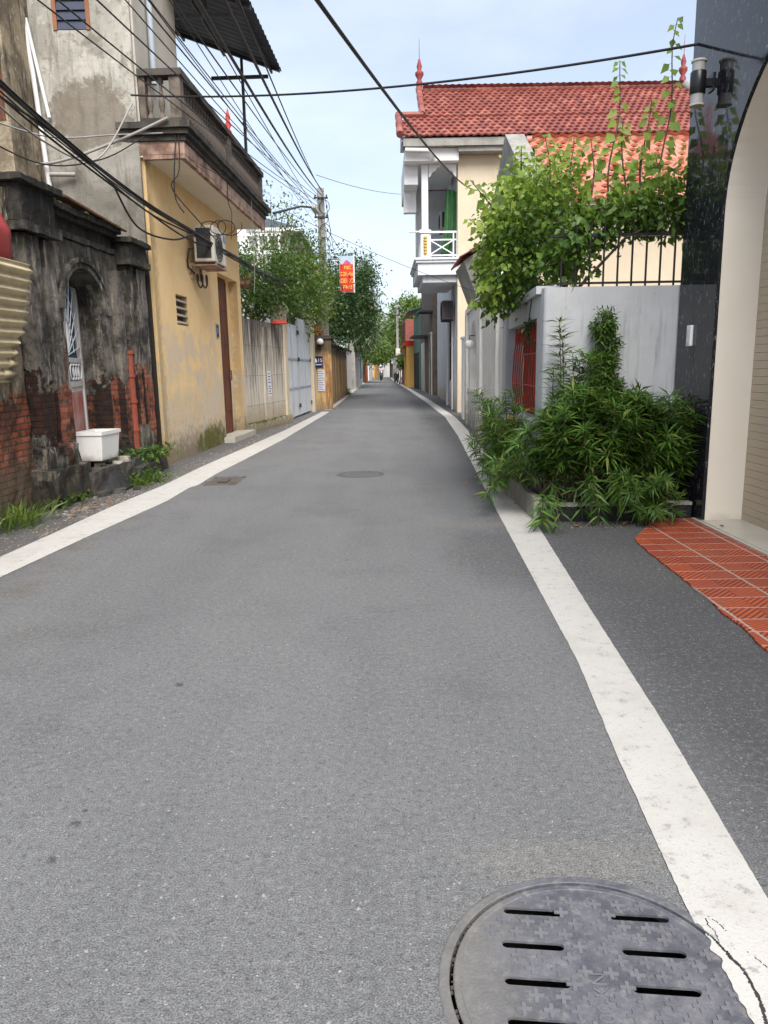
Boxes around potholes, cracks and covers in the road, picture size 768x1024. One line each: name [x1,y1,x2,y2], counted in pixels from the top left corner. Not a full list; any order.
crack [705,919,768,1024]
manhole cover [200,476,248,486]
manhole cover [439,877,754,1024]
